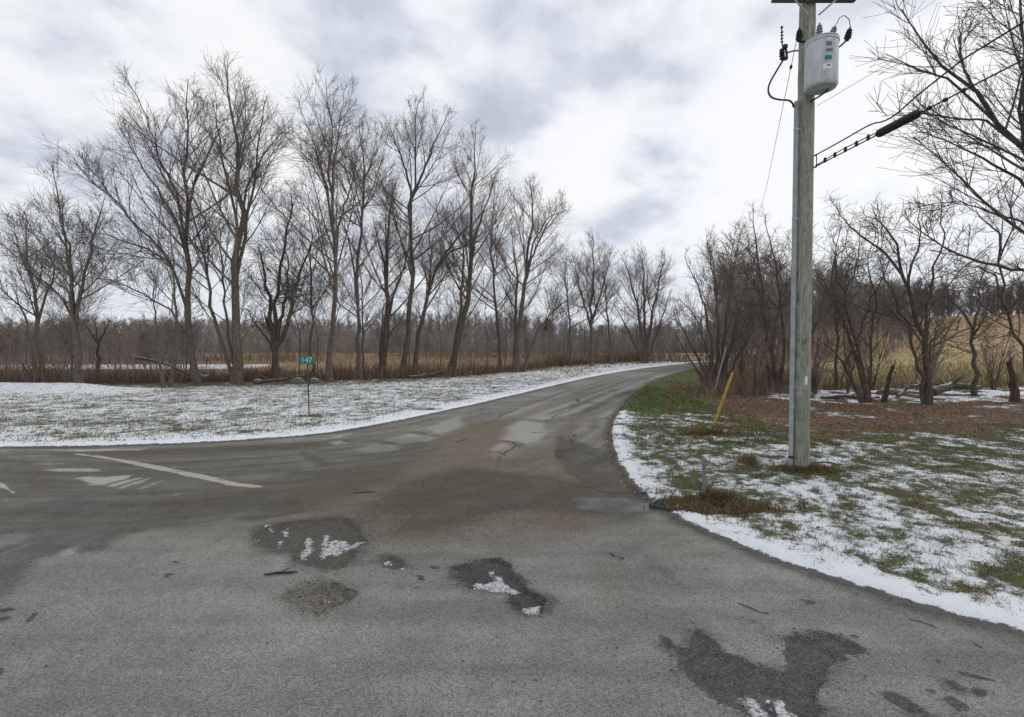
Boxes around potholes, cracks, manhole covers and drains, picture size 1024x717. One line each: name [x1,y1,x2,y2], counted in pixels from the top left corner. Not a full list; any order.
pothole [369,552,416,574]
pothole [244,514,375,577]
pothole [444,555,556,620]
crack [457,384,619,460]
